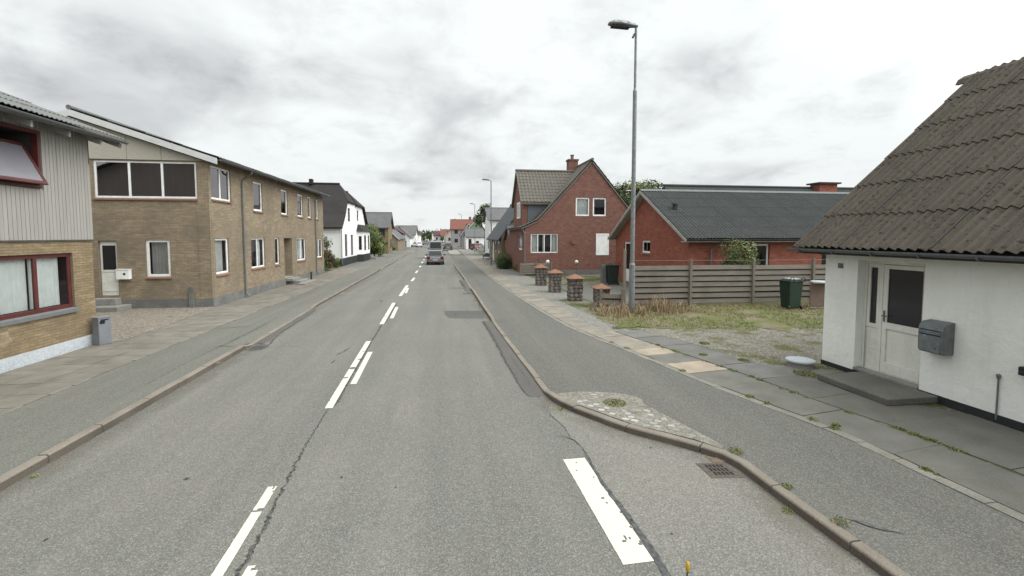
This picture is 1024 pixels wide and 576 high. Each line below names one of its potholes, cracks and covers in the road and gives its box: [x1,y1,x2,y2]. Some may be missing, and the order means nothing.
drain grate [696,463,744,478]
